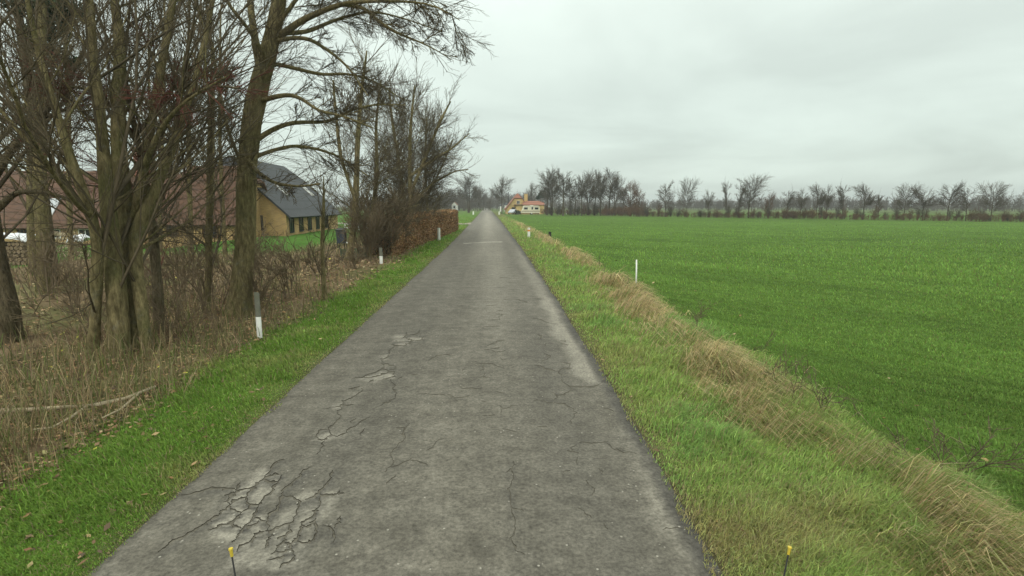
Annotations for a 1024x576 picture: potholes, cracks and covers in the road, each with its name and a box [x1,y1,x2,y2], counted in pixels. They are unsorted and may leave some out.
crack [507,461,525,555]
crack [316,277,601,485]
crack [158,459,343,568]
